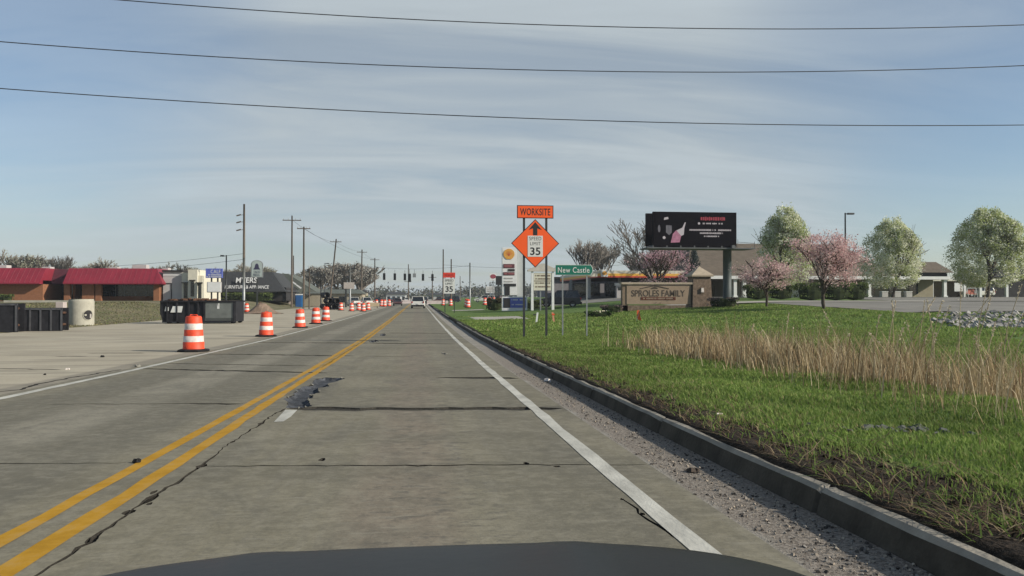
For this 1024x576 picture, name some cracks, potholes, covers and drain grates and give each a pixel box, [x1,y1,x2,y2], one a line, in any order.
crack [0,407,562,576]
pothole [284,377,345,409]
crack [620,499,674,538]
